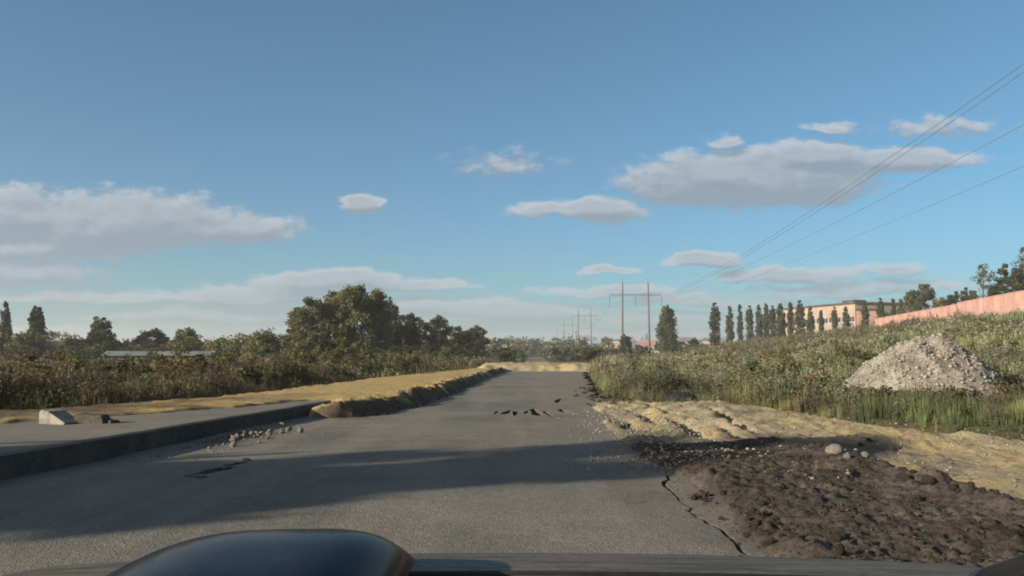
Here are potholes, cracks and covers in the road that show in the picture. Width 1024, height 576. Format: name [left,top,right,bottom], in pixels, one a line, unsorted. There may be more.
pothole [185,466,237,476]
crack [627,475,753,556]
